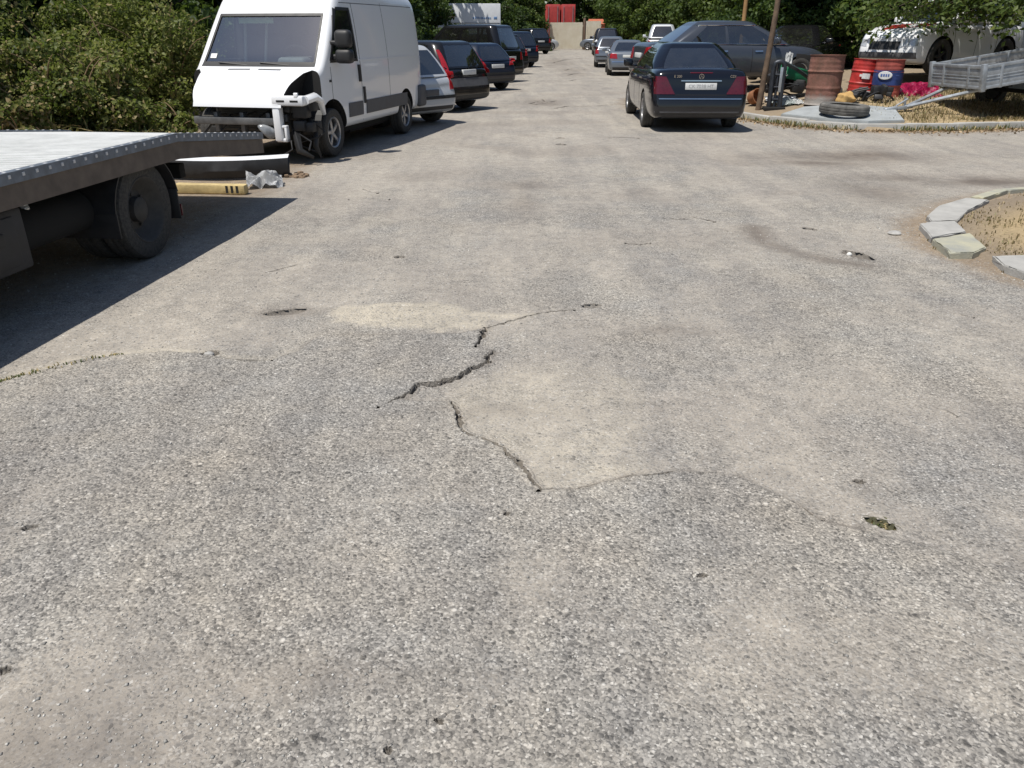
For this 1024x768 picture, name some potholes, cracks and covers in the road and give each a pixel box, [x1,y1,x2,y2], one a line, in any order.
pothole [833,249,882,262]
pothole [251,306,315,317]
pothole [857,513,906,534]
crack [378,309,740,492]
